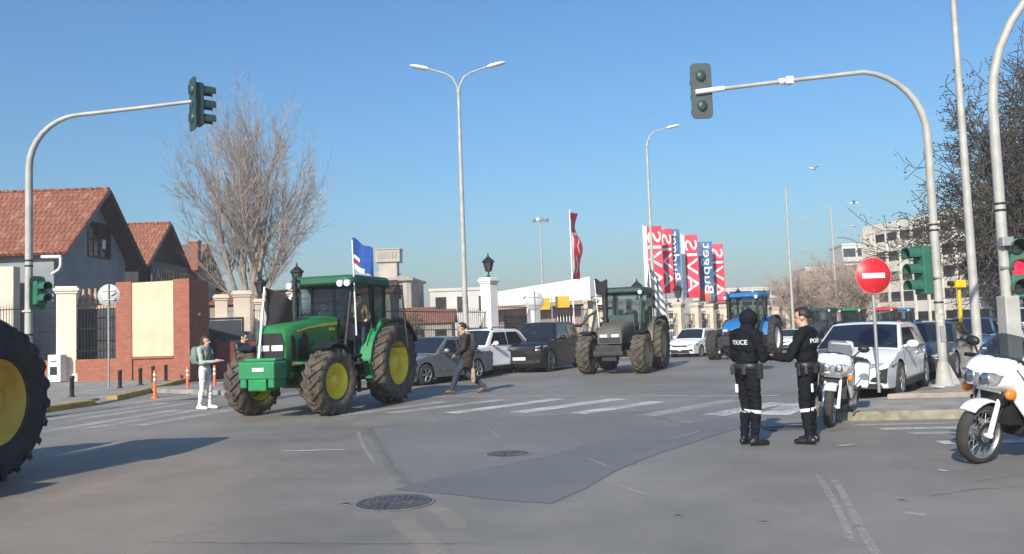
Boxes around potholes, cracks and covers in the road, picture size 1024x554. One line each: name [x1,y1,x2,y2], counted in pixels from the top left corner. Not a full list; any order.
manhole cover [484,450,531,458]
manhole cover [353,494,435,512]
